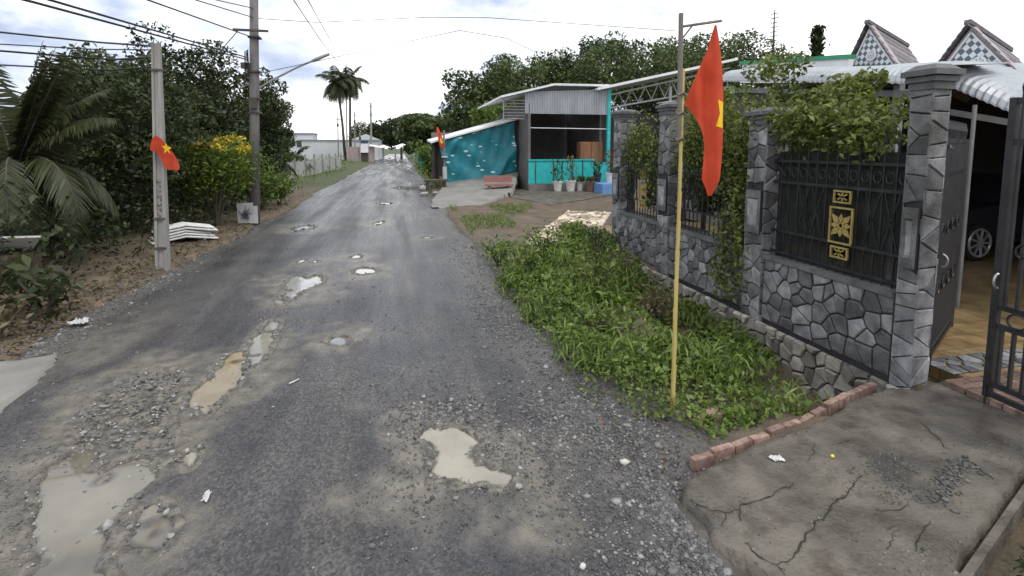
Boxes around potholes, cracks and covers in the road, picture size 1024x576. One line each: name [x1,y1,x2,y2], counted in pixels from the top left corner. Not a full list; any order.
pothole [11,441,175,576]
pothole [56,366,194,482]
pothole [279,273,327,300]
pothole [320,334,353,347]
pothole [415,418,526,494]
crack [876,503,931,551]
crack [690,473,871,574]
crack [907,415,994,505]
pothole [349,266,380,275]
pothole [116,495,186,559]
pothole [257,318,285,332]
pothole [238,329,280,374]
